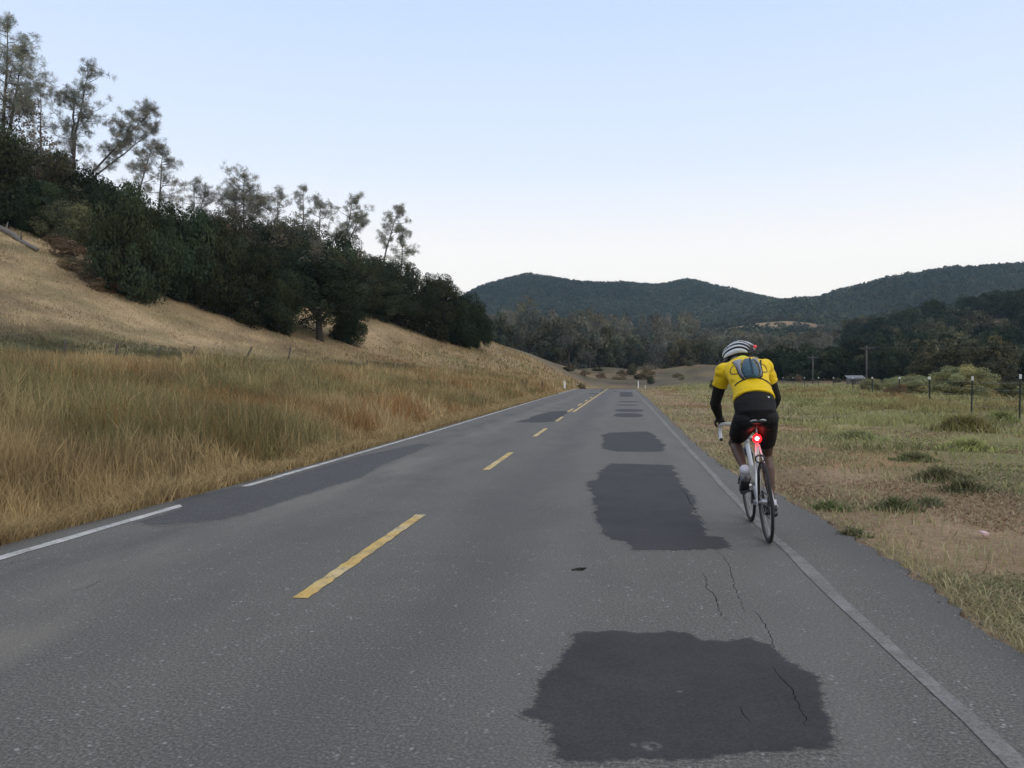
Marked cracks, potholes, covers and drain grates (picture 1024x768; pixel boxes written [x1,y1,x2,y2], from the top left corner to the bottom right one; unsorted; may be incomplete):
crack [704,557,775,647]
